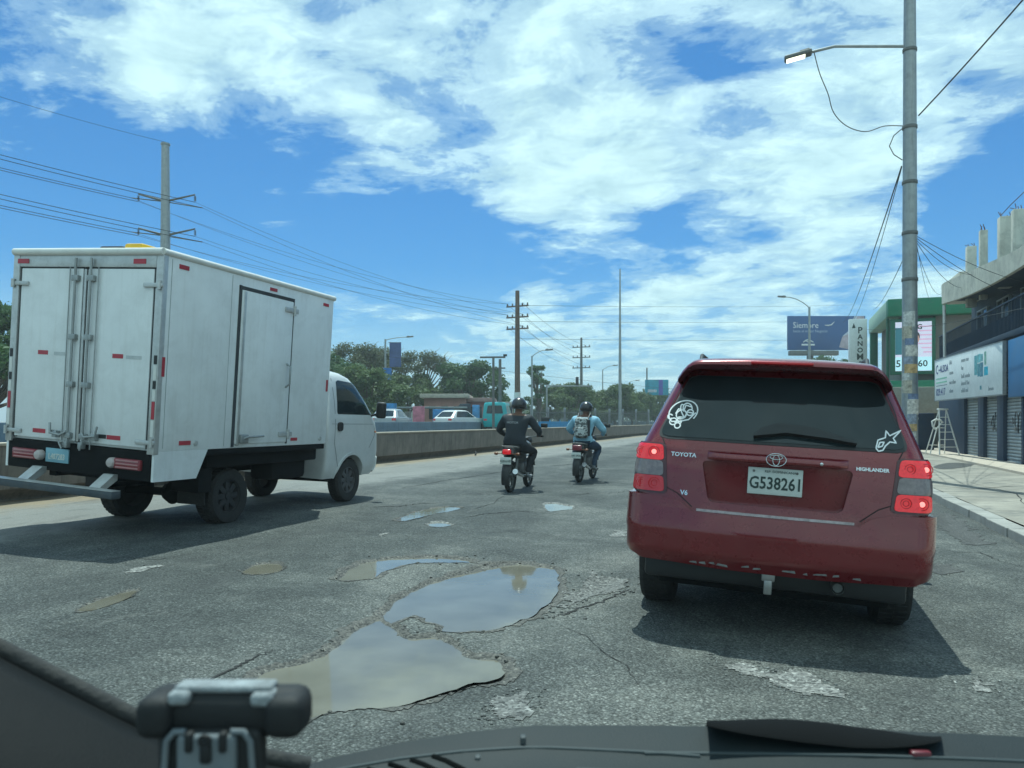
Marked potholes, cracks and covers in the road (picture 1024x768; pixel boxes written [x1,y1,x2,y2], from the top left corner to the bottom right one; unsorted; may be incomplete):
pothole [363,560,575,634]
pothole [241,615,523,726]
pothole [239,560,286,575]
pothole [329,554,485,581]
pothole [542,502,575,511]
pothole [75,587,141,613]
crack [210,649,275,679]
pothole [391,506,463,521]
crack [548,588,637,682]
